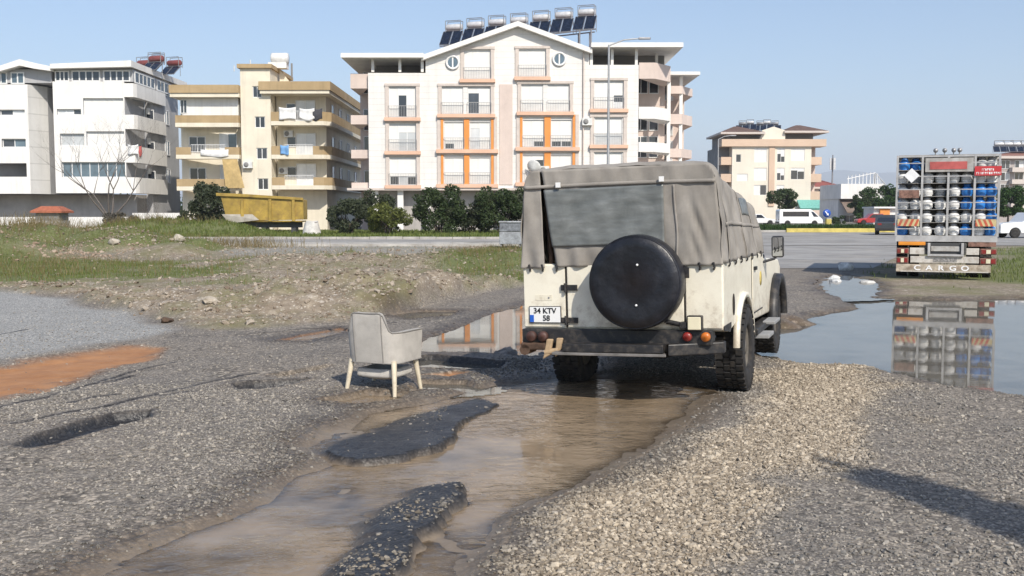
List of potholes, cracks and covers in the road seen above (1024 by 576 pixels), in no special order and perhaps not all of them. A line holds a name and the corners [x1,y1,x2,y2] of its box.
crack [0,361,261,426]
pothole [272,327,348,341]
pothole [46,375,715,576]
pothole [757,298,1024,386]
pothole [3,408,161,450]
pothole [814,274,890,299]
pothole [421,303,552,357]
pothole [410,369,479,377]
pothole [405,353,515,370]
